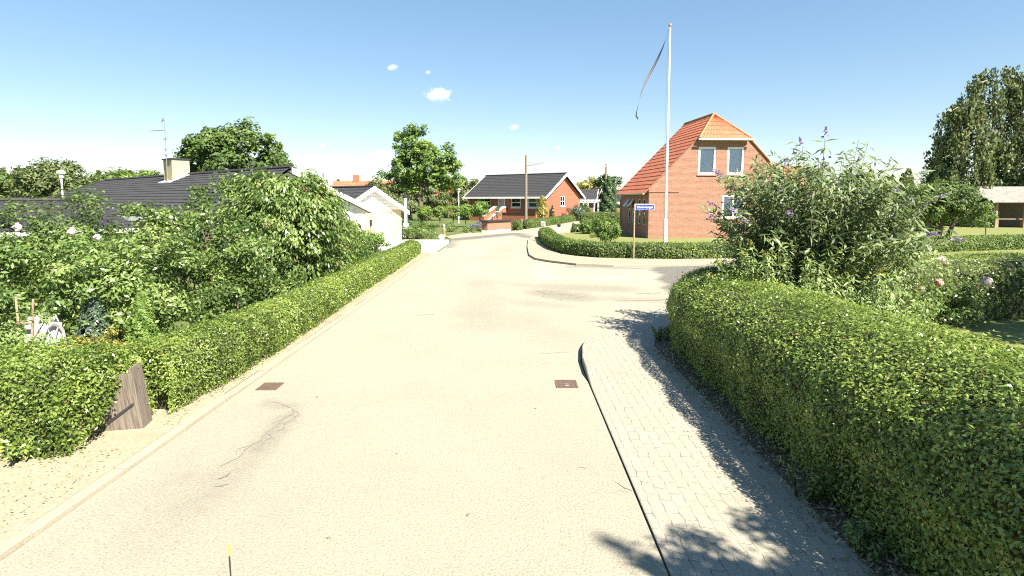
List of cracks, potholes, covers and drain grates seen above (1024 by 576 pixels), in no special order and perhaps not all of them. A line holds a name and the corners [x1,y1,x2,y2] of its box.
crack [215,403,299,487]
